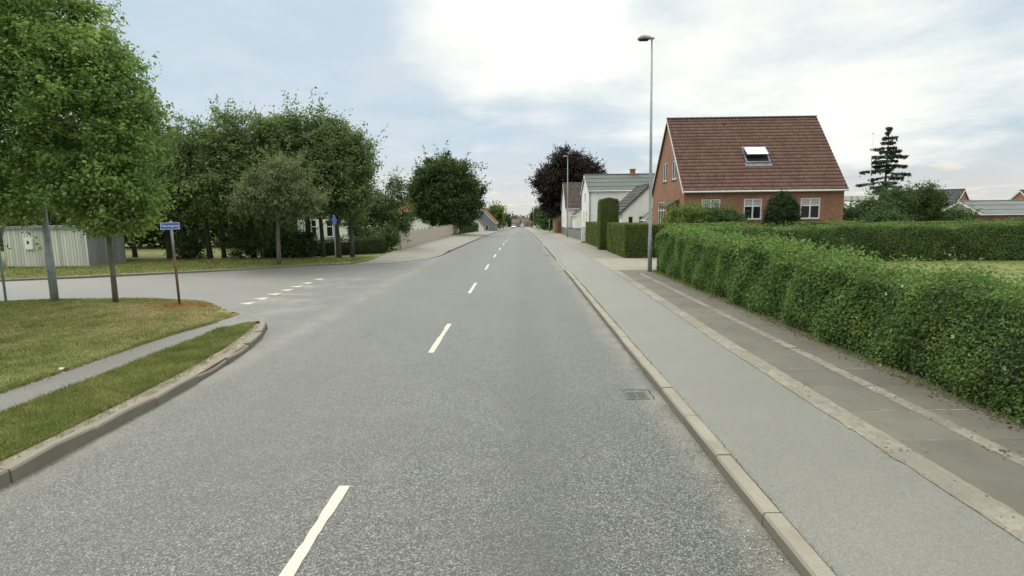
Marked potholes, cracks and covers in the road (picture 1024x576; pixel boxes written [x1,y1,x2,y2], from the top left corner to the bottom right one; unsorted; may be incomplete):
drain grate [623,392,650,400]
